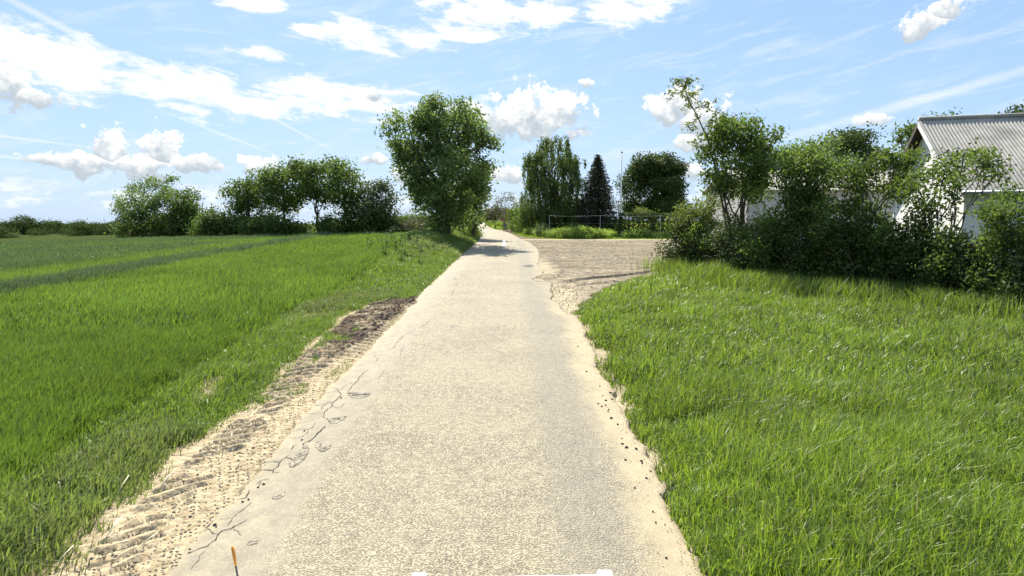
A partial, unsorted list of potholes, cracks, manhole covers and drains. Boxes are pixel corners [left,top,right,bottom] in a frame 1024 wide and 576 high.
crack [189,336,403,567]
